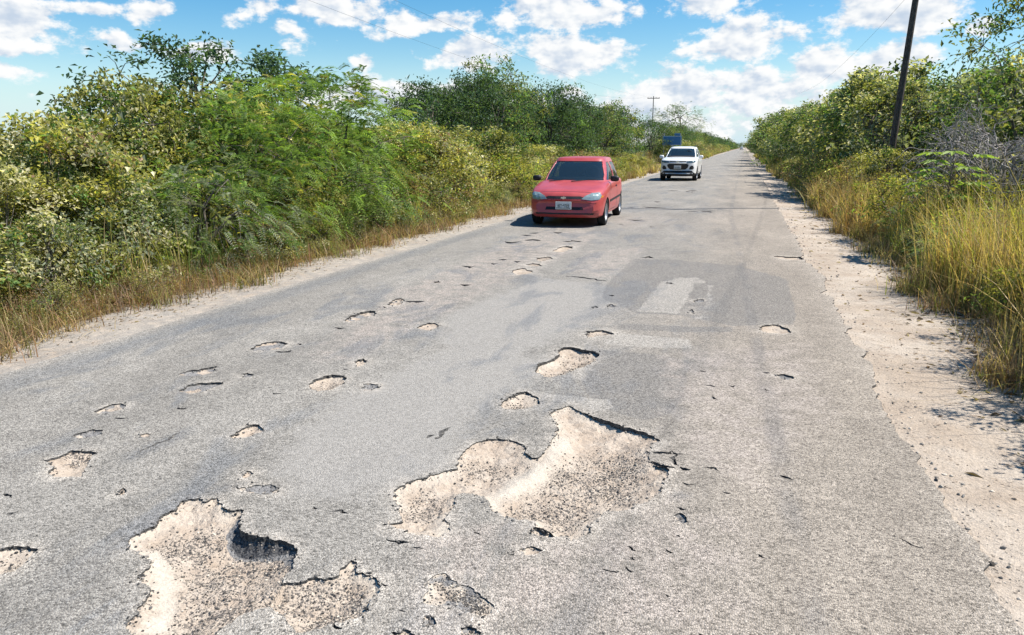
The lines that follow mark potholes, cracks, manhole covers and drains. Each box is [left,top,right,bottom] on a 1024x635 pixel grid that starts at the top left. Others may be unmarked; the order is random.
pothole [307,374,347,392]
pothole [420,573,498,618]
pothole [250,341,288,351]
pothole [0,541,38,574]
pothole [758,324,791,334]
pothole [179,381,225,393]
pothole [498,392,541,410]
pothole [43,449,98,478]
pothole [270,559,383,635]
pothole [535,347,603,377]
pothole [121,496,302,635]
pothole [230,422,265,439]
